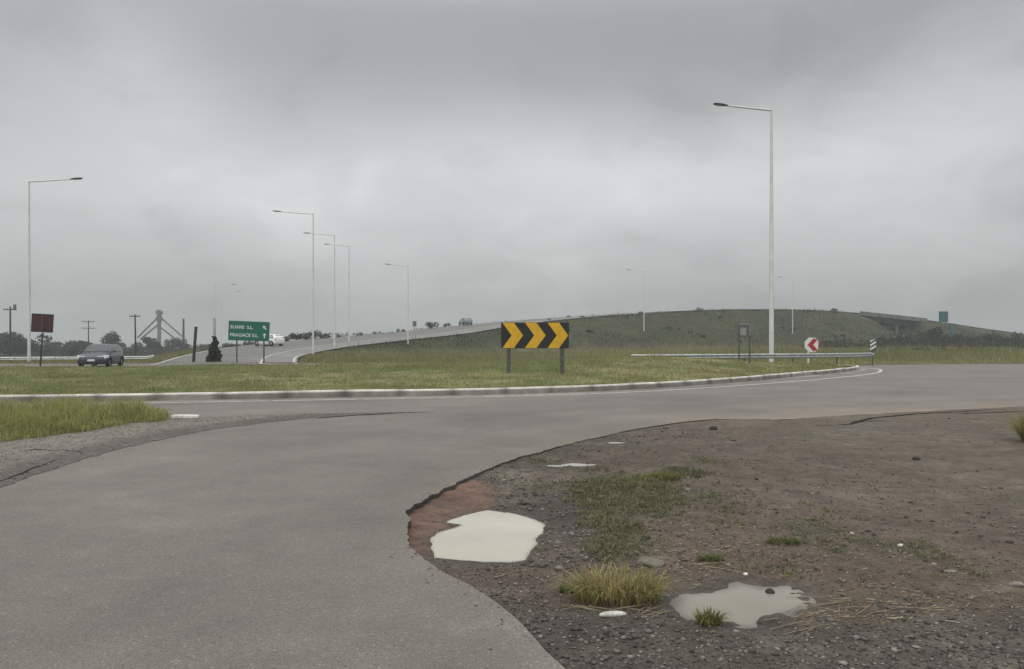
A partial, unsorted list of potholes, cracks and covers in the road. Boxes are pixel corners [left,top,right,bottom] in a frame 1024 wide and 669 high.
crack [0,449,83,481]
crack [841,409,1019,425]
pothole [408,480,570,567]
